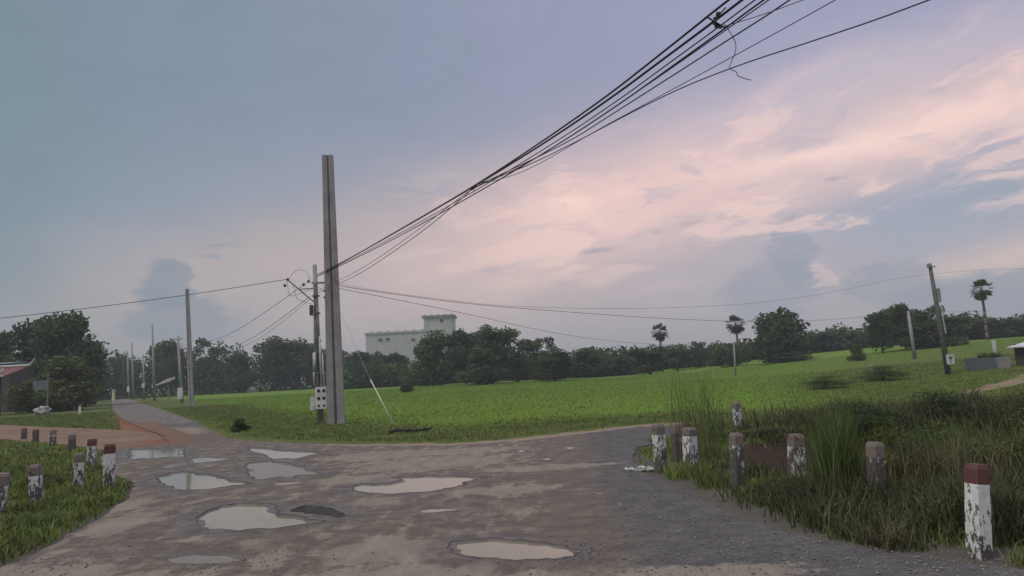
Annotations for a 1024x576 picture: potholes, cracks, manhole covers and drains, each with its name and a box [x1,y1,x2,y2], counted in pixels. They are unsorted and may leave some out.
pothole [244,461,325,480]
pothole [446,538,580,562]
pothole [247,447,319,459]
pothole [154,471,252,490]
pothole [194,503,328,531]
pothole [165,554,242,564]
pothole [127,446,187,461]
pothole [351,475,488,494]
